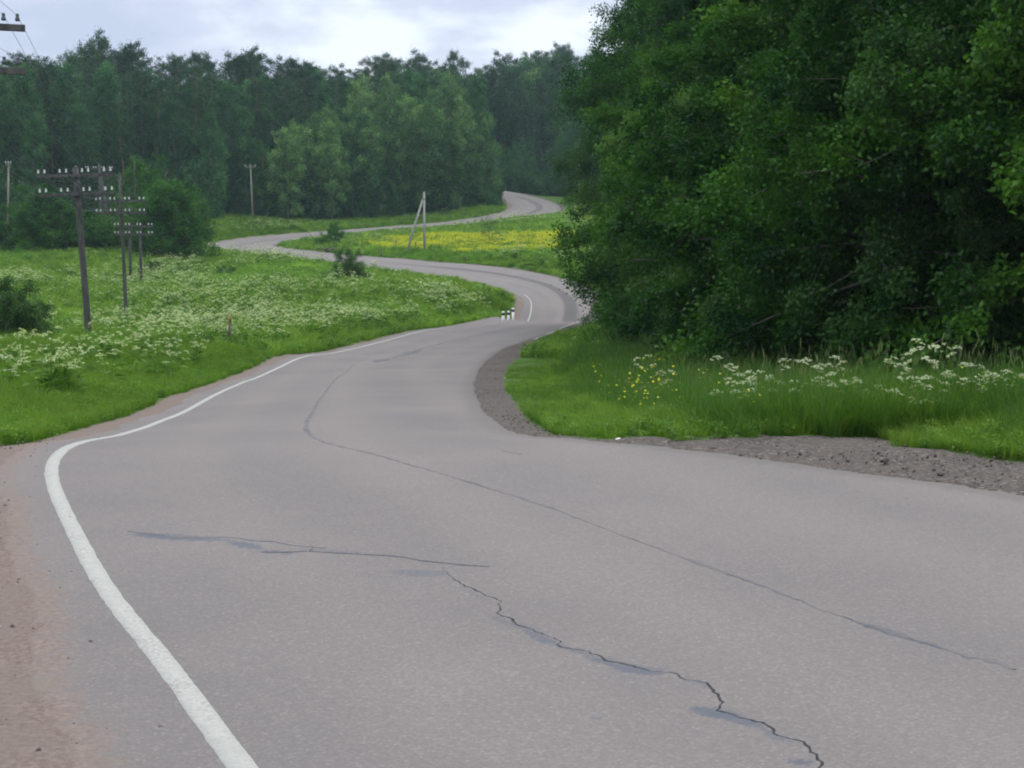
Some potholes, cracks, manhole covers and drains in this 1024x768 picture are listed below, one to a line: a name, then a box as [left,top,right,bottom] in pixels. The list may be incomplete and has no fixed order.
crack [127,531,824,768]
